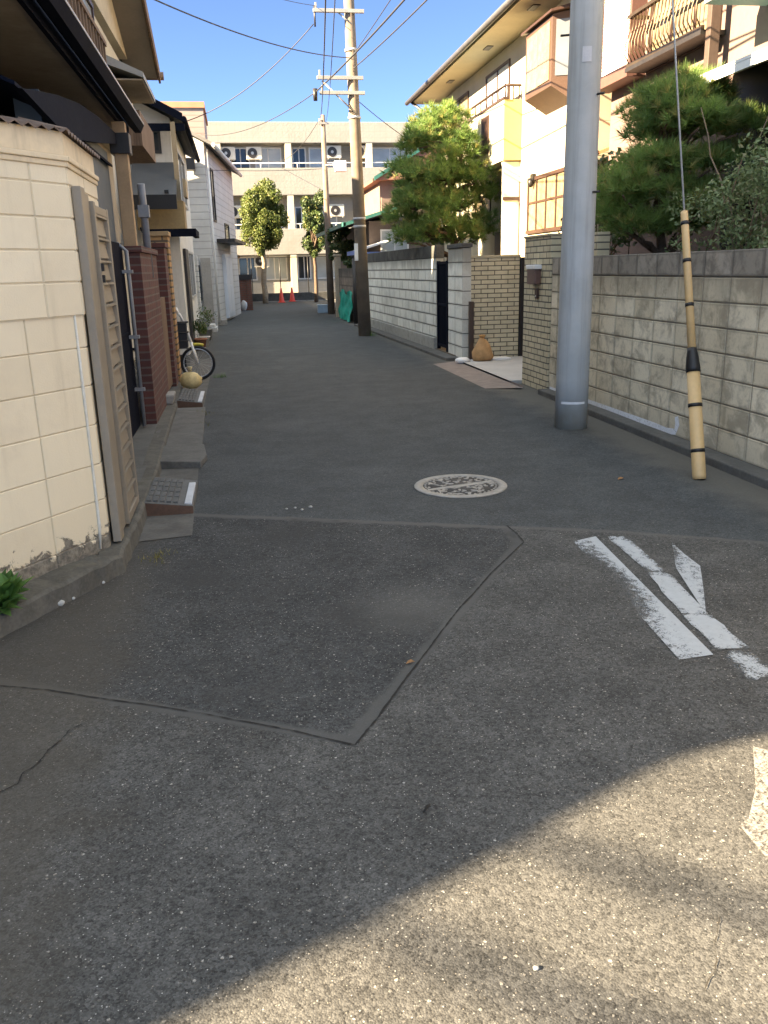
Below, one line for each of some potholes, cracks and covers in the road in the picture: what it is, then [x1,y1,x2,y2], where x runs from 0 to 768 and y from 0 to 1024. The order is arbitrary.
crack [704,918,720,990]
manhole cover [414,474,507,498]
crack [0,724,81,792]
